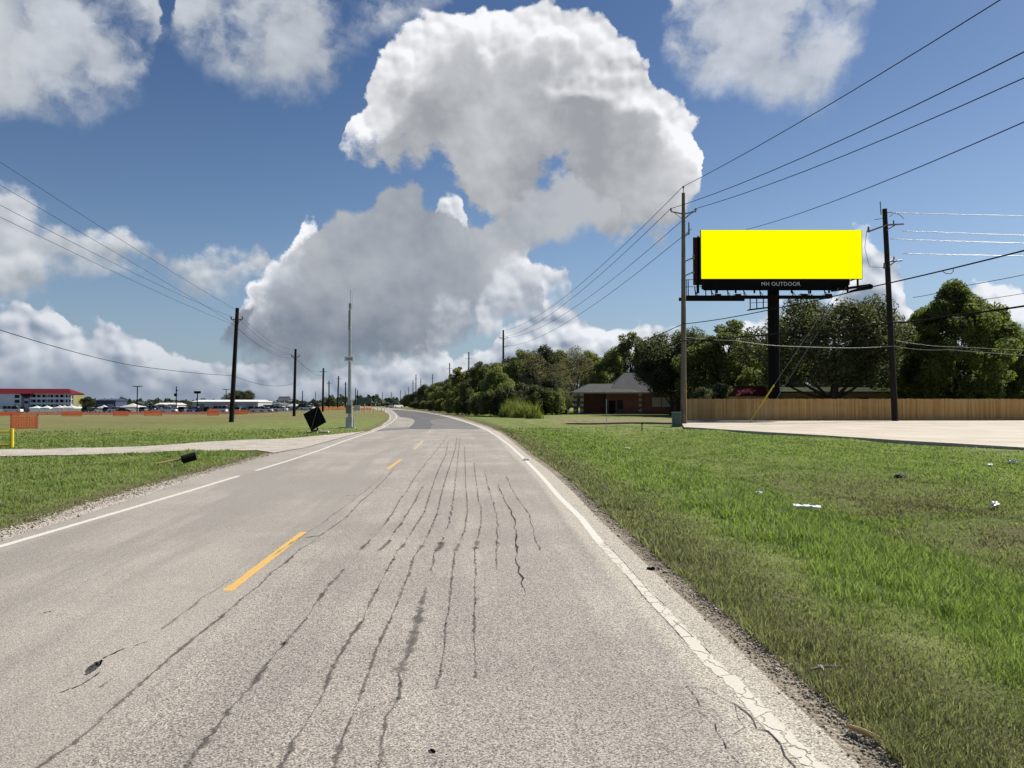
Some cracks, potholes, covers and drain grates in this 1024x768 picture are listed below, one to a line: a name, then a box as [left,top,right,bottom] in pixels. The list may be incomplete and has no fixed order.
pothole [84,660,104,675]
crack [186,569,345,766]
crack [61,526,318,692]
crack [278,441,541,768]
crack [686,685,800,768]
